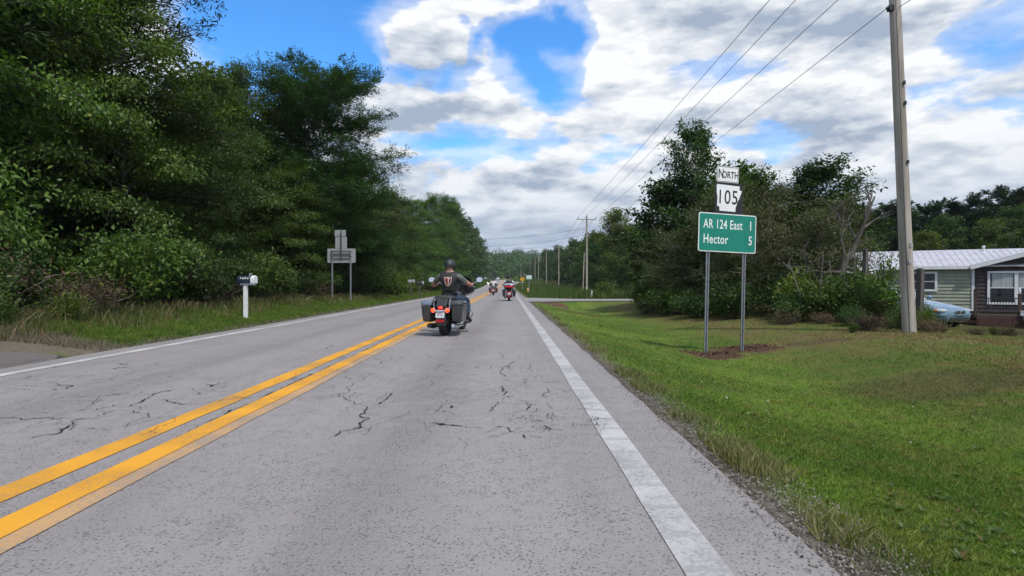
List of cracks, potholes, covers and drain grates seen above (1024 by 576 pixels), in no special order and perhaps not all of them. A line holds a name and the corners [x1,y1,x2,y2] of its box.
crack [1,358,266,438]
crack [272,345,620,442]
